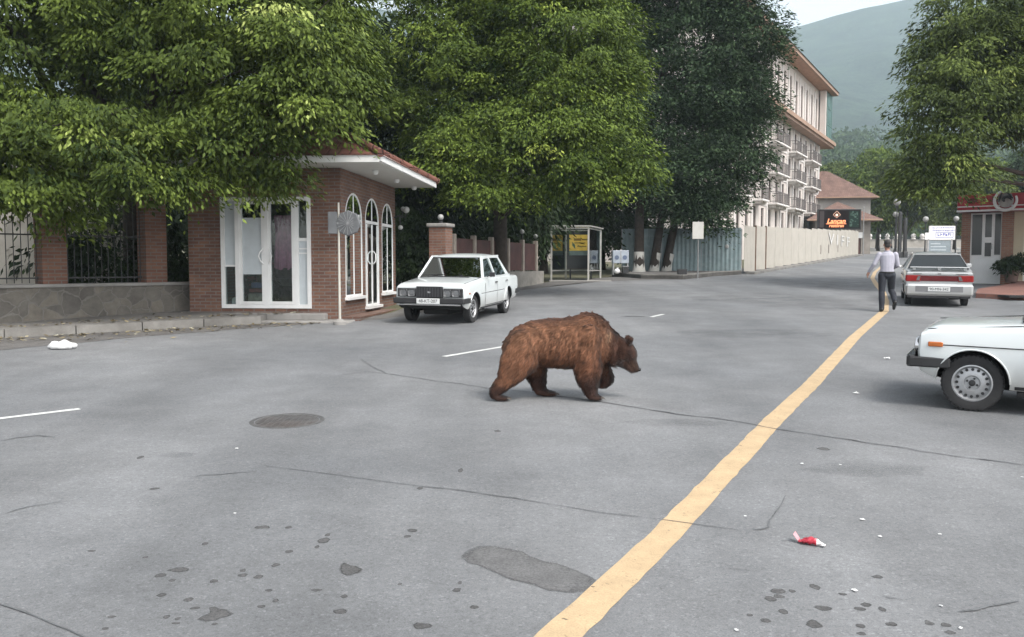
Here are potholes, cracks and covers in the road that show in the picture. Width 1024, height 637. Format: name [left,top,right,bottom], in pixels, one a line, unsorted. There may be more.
crack [961,600,1019,611]
crack [761,495,786,529]
crack [0,603,88,637]
manhole cover [249,413,325,429]
